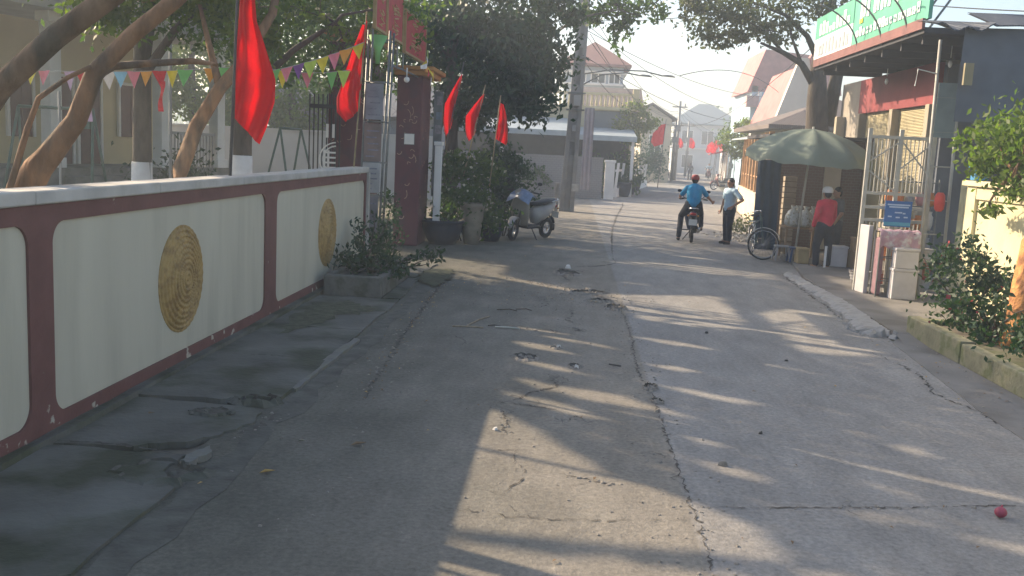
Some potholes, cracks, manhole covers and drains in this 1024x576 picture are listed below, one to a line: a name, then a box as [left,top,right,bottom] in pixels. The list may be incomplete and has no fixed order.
pothole [188,406,236,417]
crack [425,375,685,522]
pothole [510,352,540,362]
pothole [552,268,583,277]
crack [872,338,1004,425]
crack [522,309,585,332]
